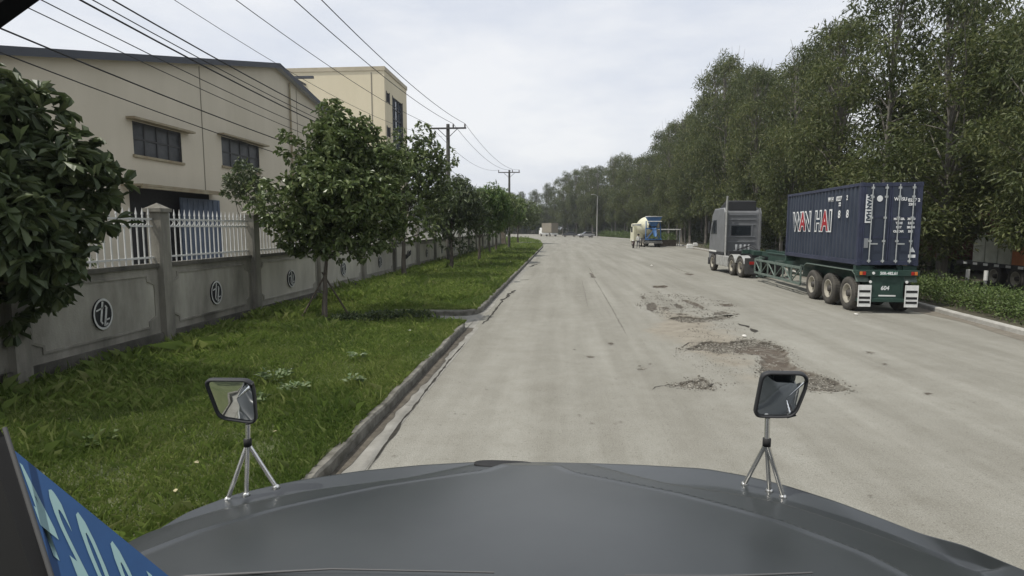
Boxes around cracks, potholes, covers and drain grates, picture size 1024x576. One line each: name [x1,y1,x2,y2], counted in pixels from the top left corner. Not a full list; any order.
pothole [676,337,855,395]
pothole [663,375,727,391]
crack [482,264,537,324]
pothole [644,302,660,312]
pothole [667,313,739,323]
pothole [680,299,706,310]
